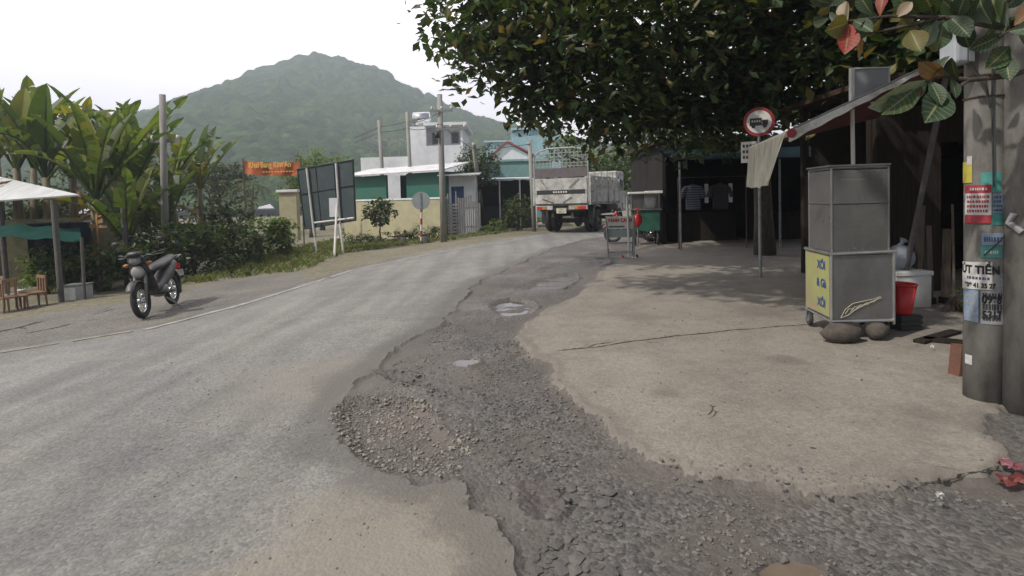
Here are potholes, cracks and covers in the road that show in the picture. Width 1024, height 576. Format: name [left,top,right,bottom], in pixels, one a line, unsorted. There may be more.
pothole [451,357,481,367]
crack [920,465,1001,486]
pothole [752,552,833,576]
pothole [522,273,579,291]
crack [555,324,809,351]
pothole [514,478,566,522]
pothole [332,392,461,477]
pothole [486,296,540,316]
